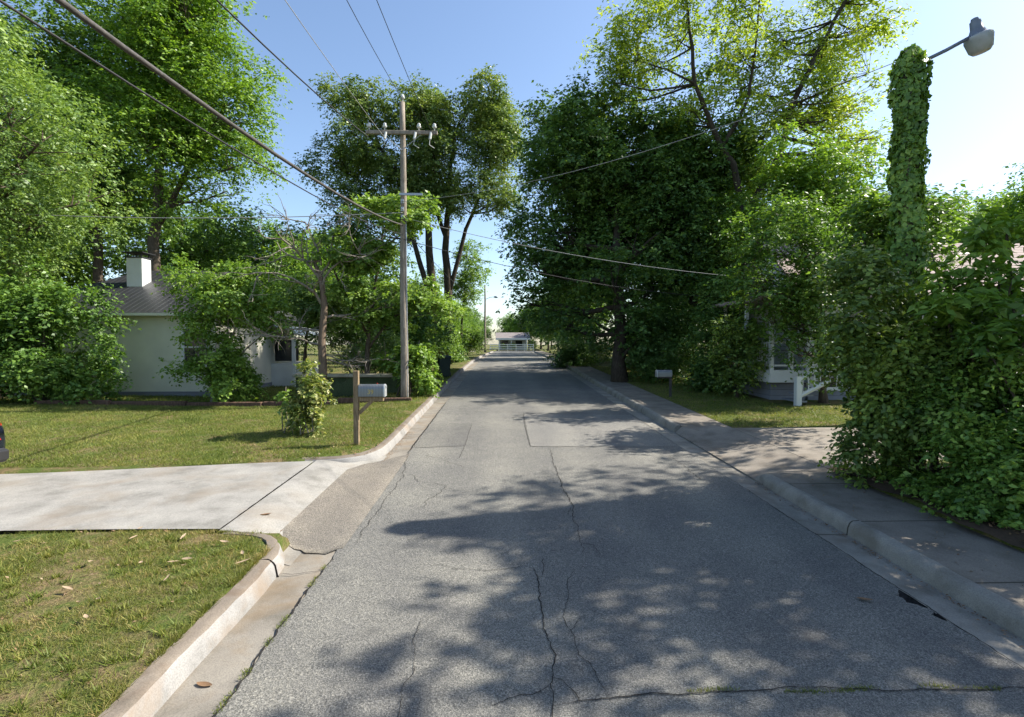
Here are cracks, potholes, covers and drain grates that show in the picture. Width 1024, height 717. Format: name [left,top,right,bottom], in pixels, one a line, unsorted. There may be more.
crack [549,449,600,554]
pothole [898,590,928,608]
crack [398,624,420,716]
crack [436,560,1024,717]
